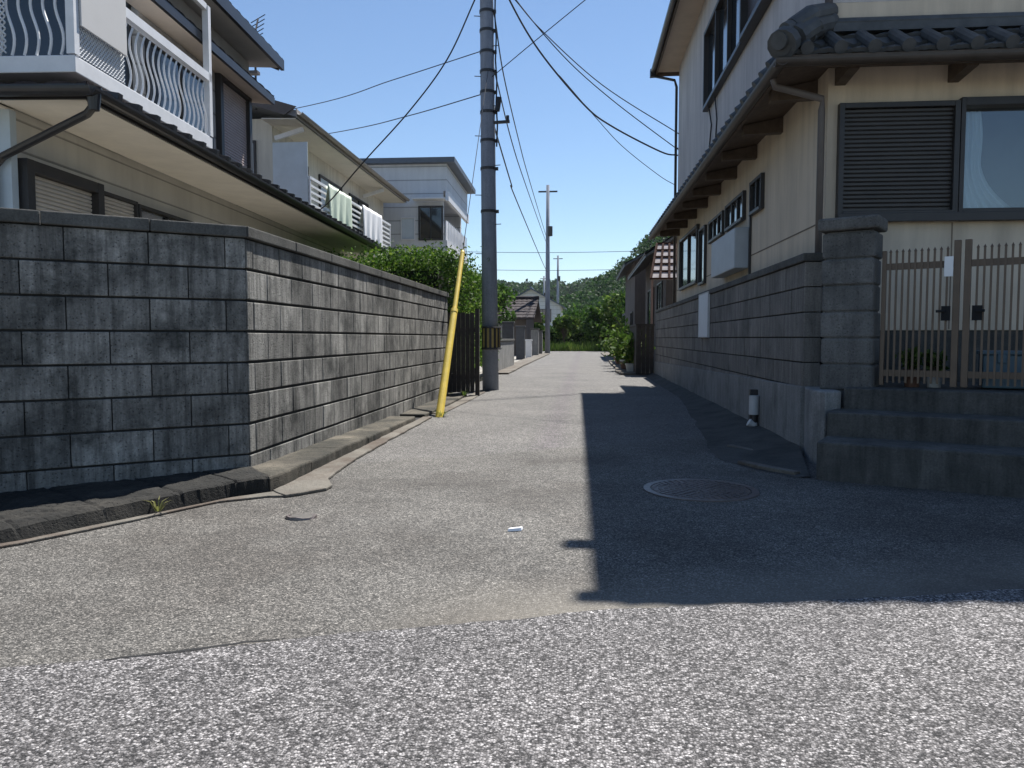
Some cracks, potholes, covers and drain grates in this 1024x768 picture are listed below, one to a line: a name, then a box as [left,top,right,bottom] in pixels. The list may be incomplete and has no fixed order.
crack [104,638,285,660]
manhole cover [643,479,759,502]
